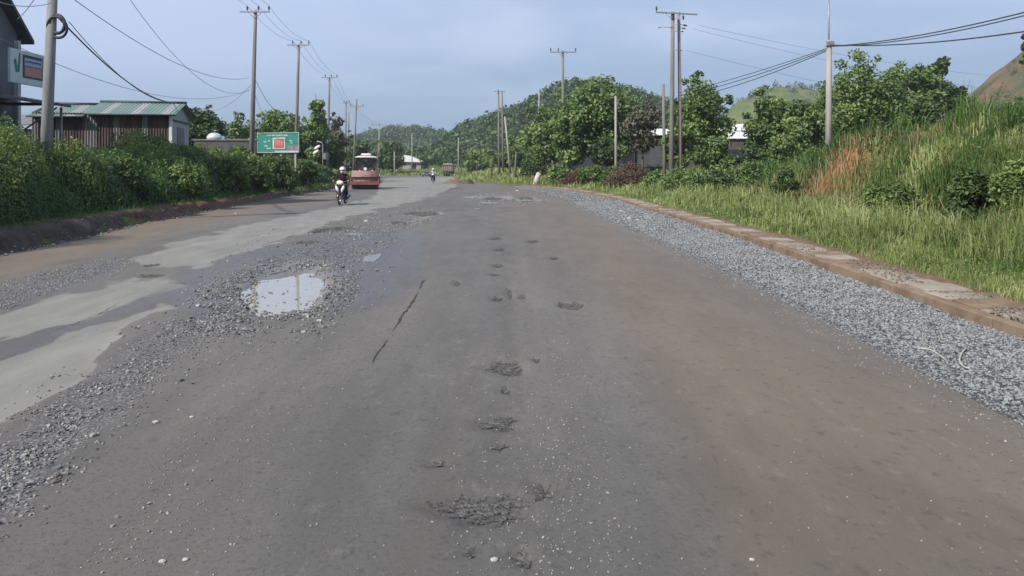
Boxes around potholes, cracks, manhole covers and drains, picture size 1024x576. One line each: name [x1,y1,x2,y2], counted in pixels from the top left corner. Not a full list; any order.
crack [372,280,424,362]
pothole [530,483,556,500]
pothole [559,301,583,310]
pothole [485,361,522,375]
pothole [427,493,535,525]
pothole [478,417,517,431]
